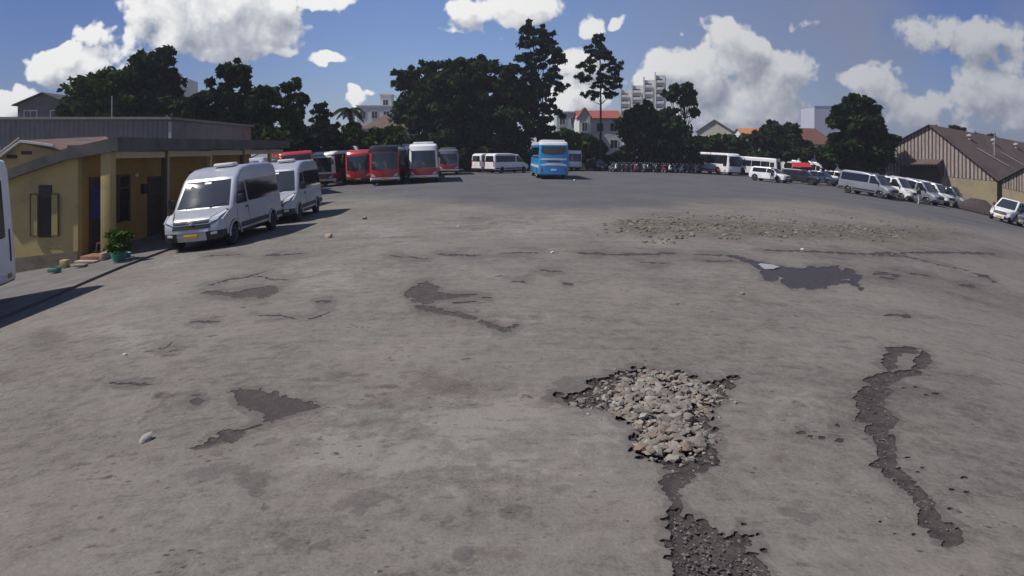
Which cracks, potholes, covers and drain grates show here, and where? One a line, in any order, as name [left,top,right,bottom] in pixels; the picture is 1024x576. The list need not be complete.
crack [579,252,733,264]
pothole [659,508,771,576]
crack [764,249,997,288]
pothole [553,366,741,468]
